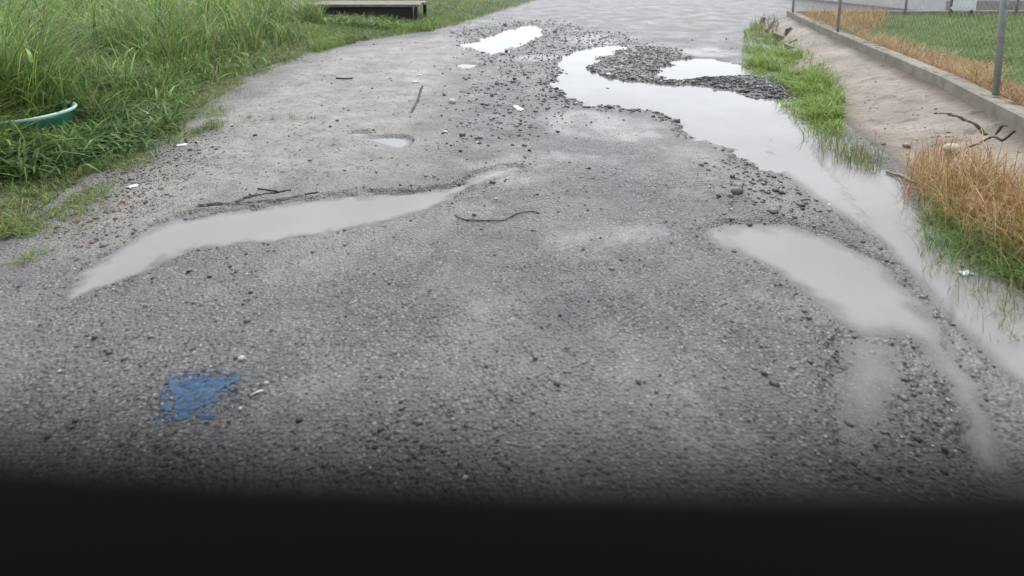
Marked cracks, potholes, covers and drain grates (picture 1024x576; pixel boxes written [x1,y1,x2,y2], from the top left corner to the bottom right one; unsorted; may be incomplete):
pothole [541,43,818,176]
pothole [455,23,552,55]
pothole [25,160,532,317]
pothole [358,132,421,150]
